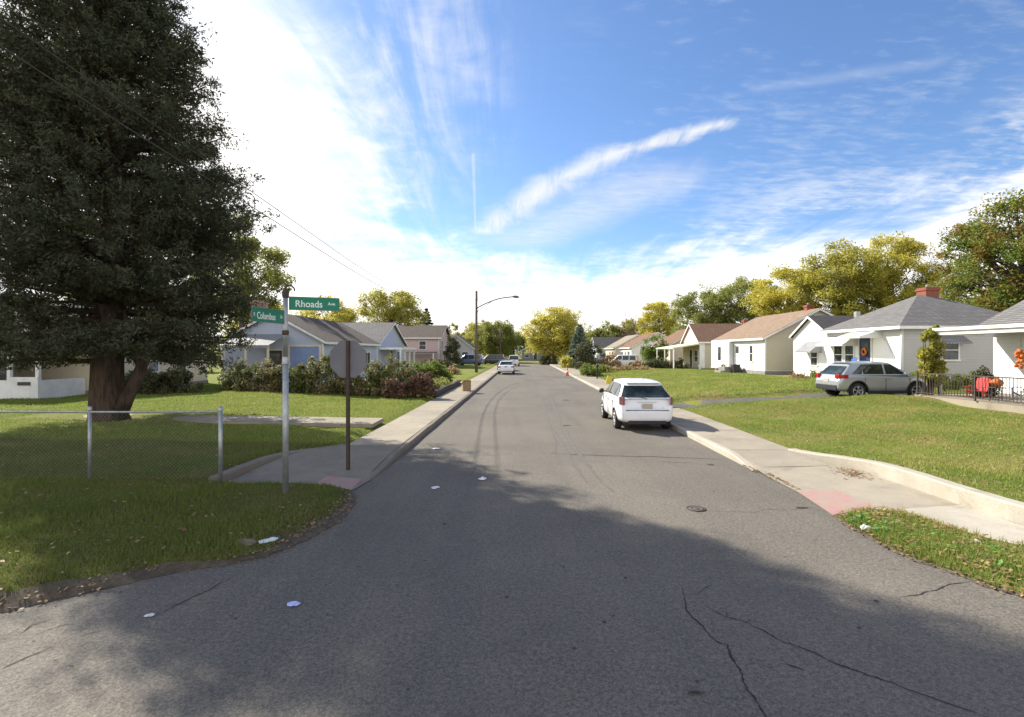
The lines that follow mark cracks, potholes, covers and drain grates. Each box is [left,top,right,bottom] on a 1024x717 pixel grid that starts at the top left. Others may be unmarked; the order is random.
crack [158,577,232,614]
crack [682,584,987,717]
